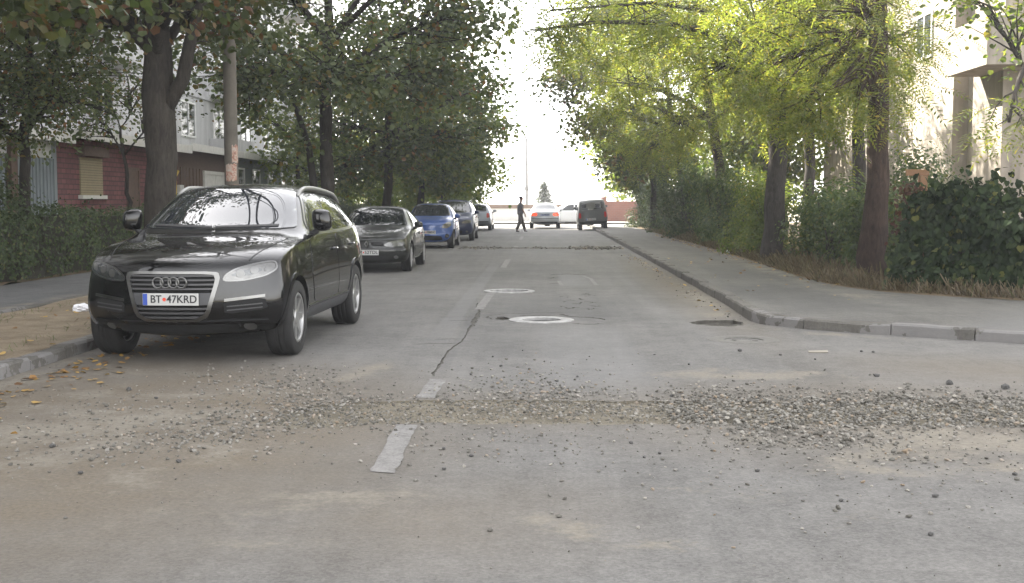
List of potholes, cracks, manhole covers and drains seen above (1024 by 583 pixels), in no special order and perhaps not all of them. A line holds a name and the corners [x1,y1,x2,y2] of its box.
crack [431,274,605,376]
manhole cover [509,316,574,324]
manhole cover [708,335,780,344]
